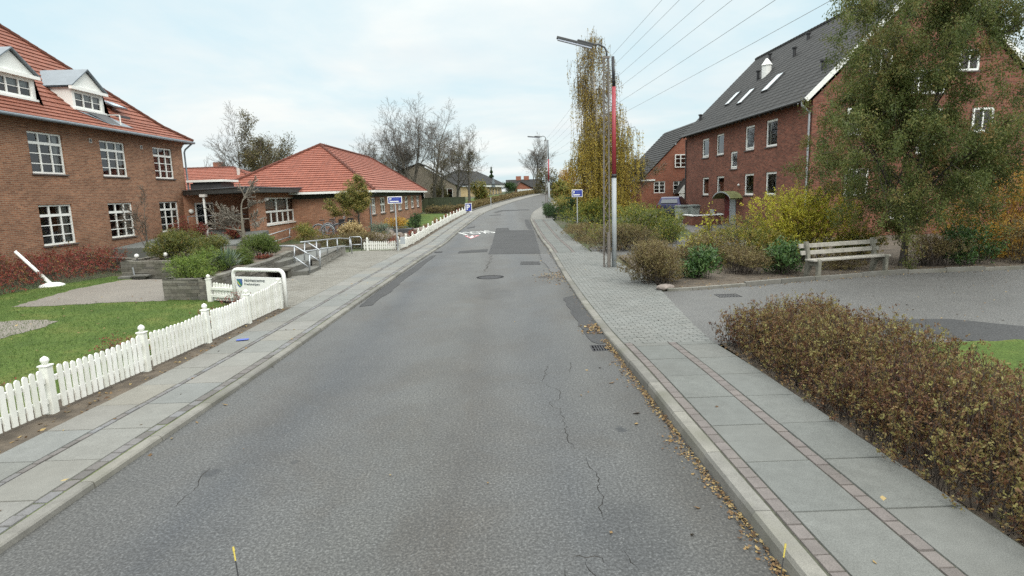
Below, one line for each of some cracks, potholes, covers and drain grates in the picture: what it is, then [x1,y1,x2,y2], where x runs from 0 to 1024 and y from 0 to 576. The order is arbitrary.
crack [542,366,605,521]
